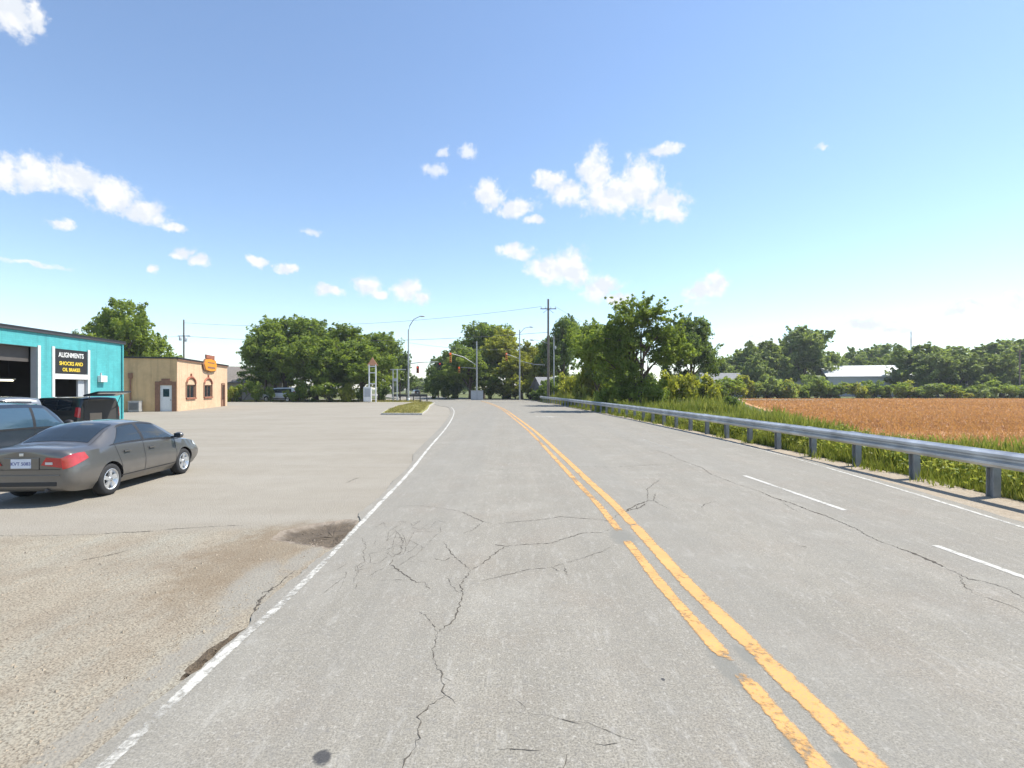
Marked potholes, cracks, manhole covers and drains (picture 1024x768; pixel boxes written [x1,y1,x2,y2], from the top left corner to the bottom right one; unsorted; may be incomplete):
crack [674,457,1023,609]
crack [251,572,293,615]
crack [325,454,674,768]
